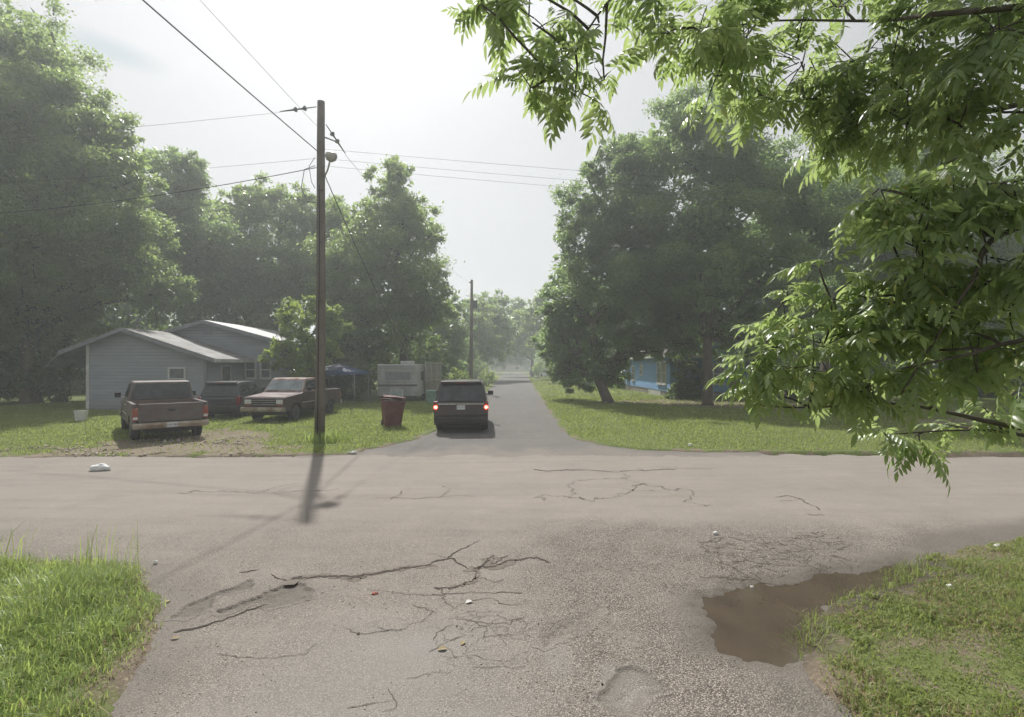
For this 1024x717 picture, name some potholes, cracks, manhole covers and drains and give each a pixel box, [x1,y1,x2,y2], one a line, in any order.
crack [245,540,551,711]
crack [698,531,853,586]
pothole [210,579,318,617]
pothole [588,662,679,717]
crack [534,468,711,506]
pothole [162,577,261,622]
